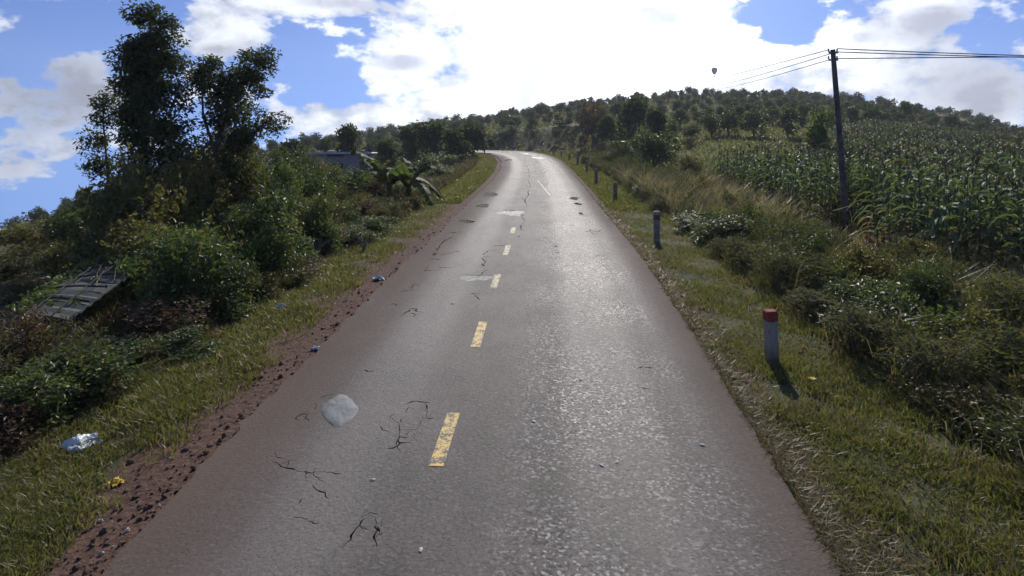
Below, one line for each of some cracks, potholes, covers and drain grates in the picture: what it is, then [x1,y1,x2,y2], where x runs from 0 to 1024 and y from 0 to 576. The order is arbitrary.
crack [273,450,340,525]
crack [395,232,460,318]
crack [480,158,536,274]
crack [379,401,433,450]
crack [344,512,383,546]
